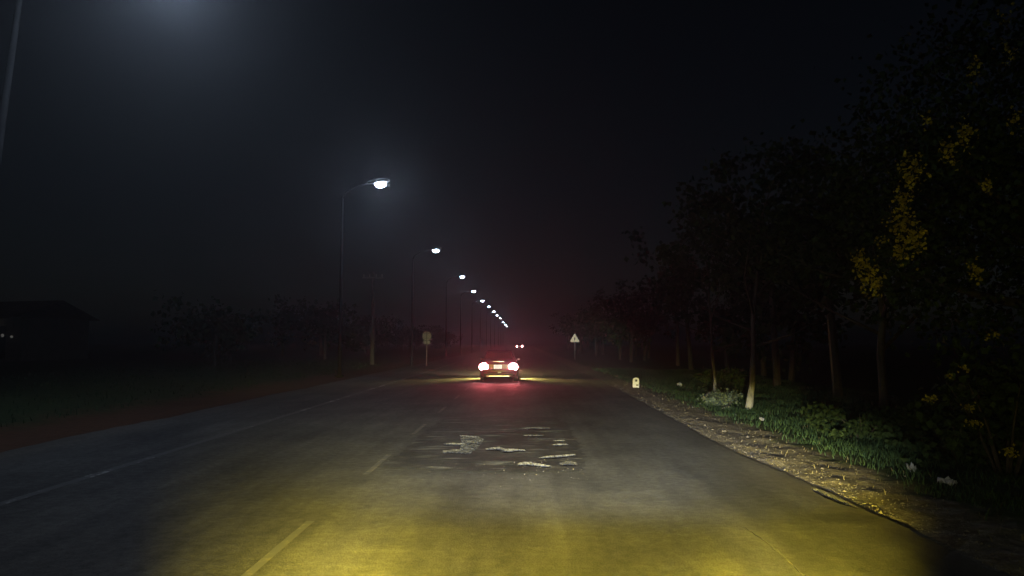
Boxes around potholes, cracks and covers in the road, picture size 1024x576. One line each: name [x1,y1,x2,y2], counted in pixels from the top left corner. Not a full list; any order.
pothole [442,435,484,454]
crack [746,528,806,576]
